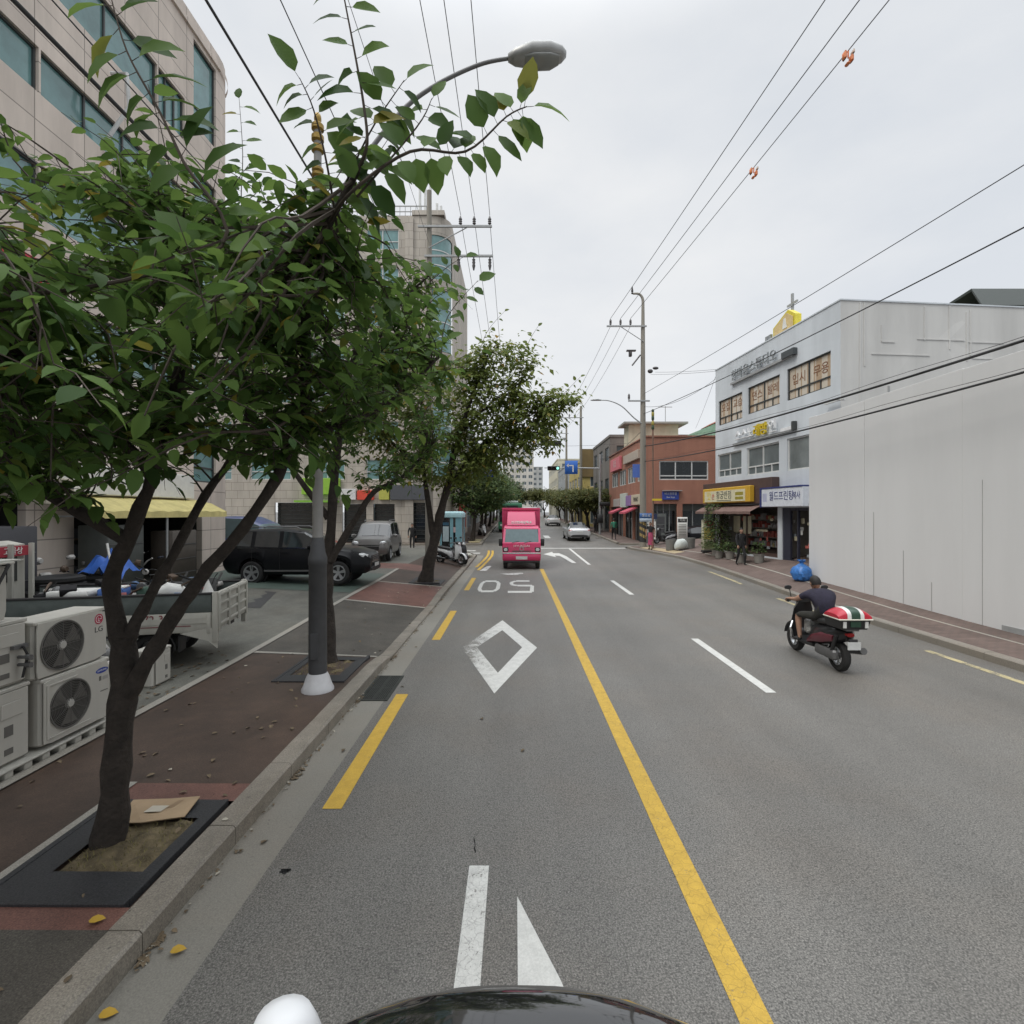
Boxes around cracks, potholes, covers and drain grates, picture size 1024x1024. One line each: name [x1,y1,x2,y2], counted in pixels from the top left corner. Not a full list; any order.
drain grate [359,675,404,701]
